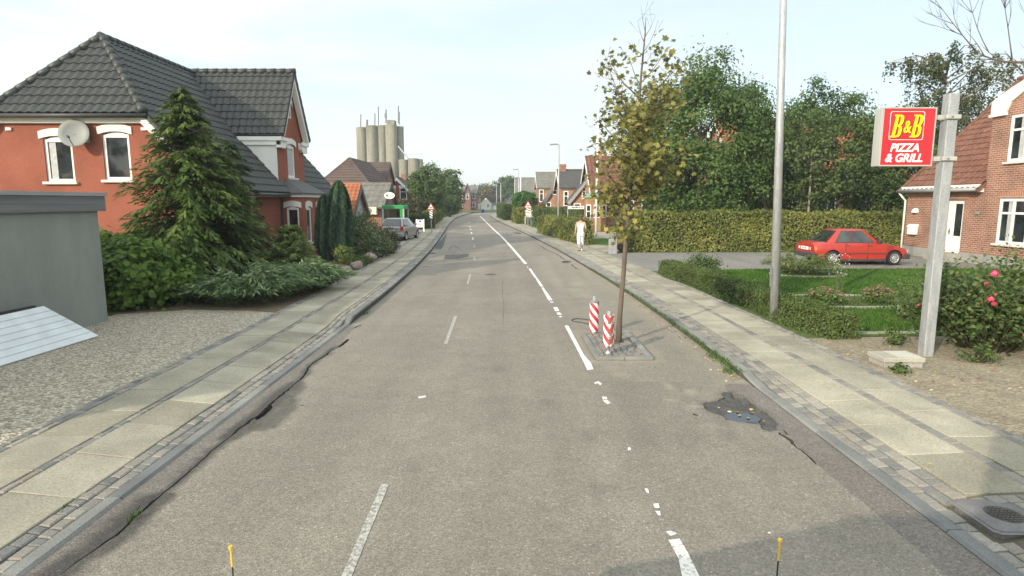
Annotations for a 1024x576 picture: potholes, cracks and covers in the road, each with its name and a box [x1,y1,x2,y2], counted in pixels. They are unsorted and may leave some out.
pothole [703,392,778,431]
crack [60,349,333,575]
crack [779,430,797,447]
